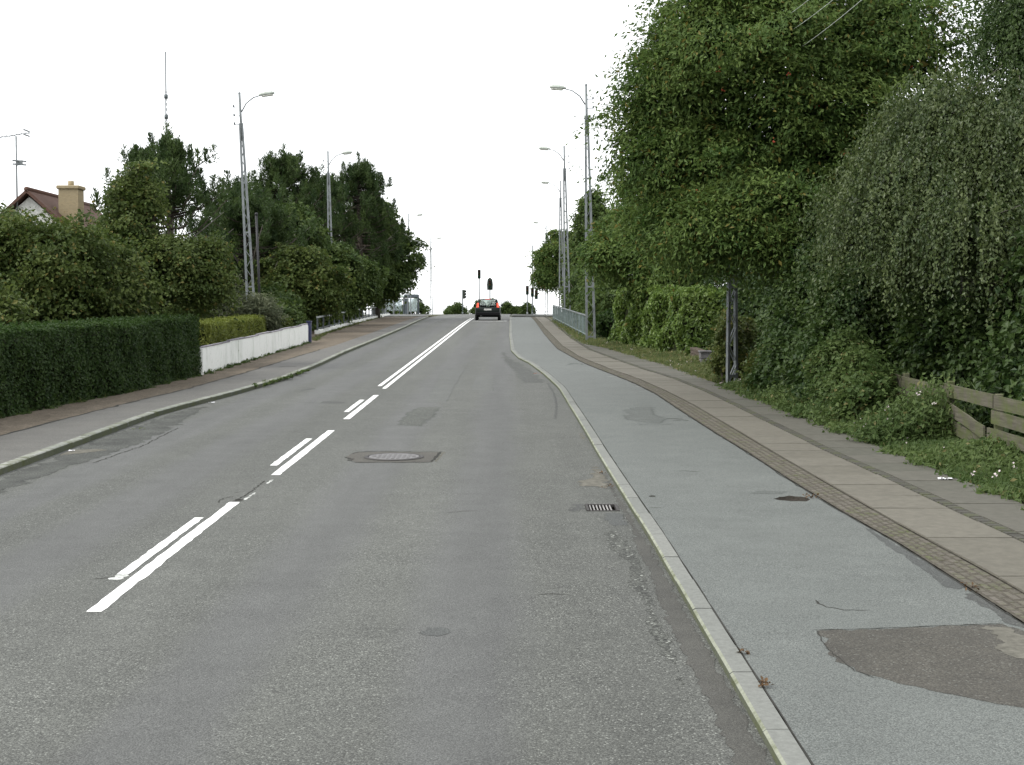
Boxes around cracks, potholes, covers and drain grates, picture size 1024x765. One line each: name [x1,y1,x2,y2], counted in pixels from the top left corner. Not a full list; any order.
crack [547,383,558,419]
